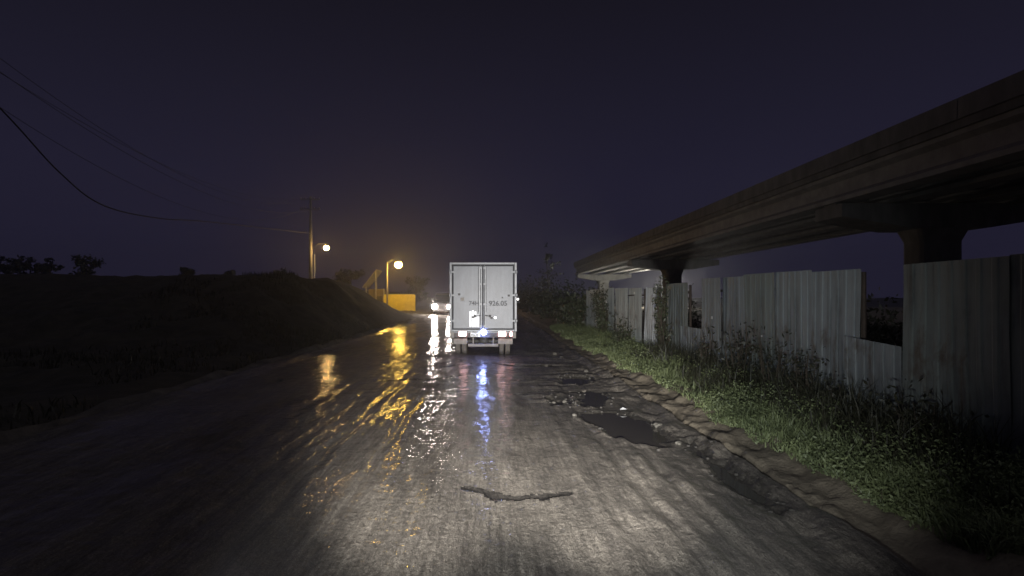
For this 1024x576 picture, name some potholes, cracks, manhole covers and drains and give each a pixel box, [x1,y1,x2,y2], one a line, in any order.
pothole [554,373,596,385]
crack [461,486,573,503]
pothole [680,436,795,516]
pothole [574,391,614,409]
pothole [573,410,680,451]
